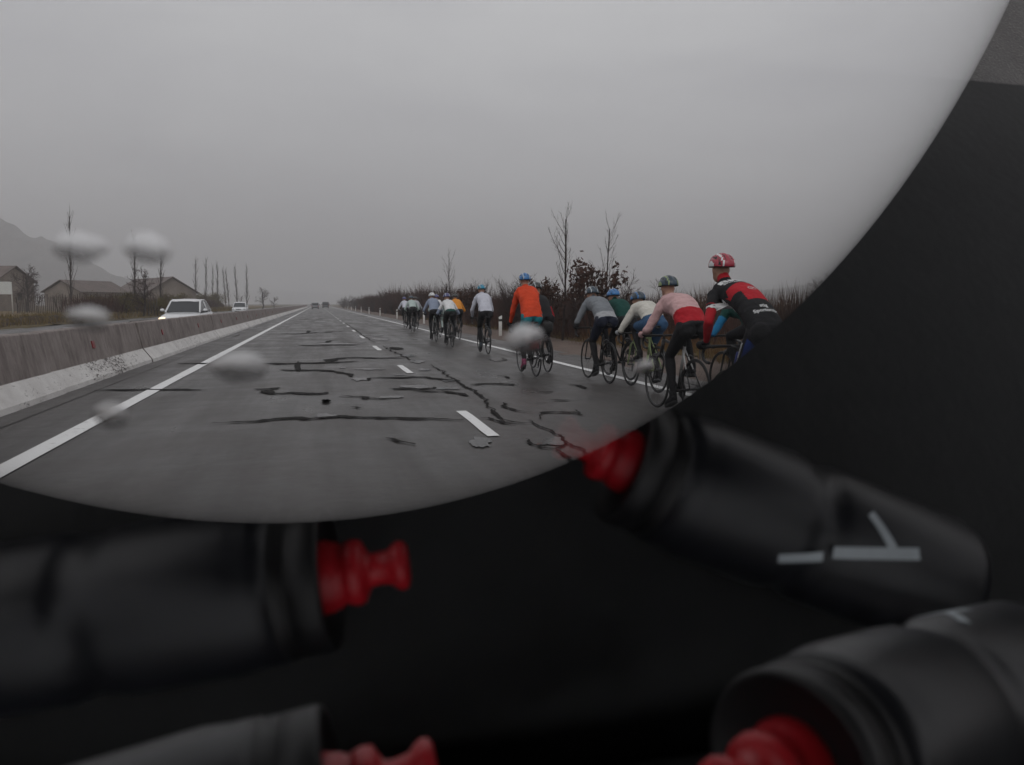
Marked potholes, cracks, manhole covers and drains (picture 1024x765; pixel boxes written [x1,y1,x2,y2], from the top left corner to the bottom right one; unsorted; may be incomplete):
crack [212,319,587,457]
